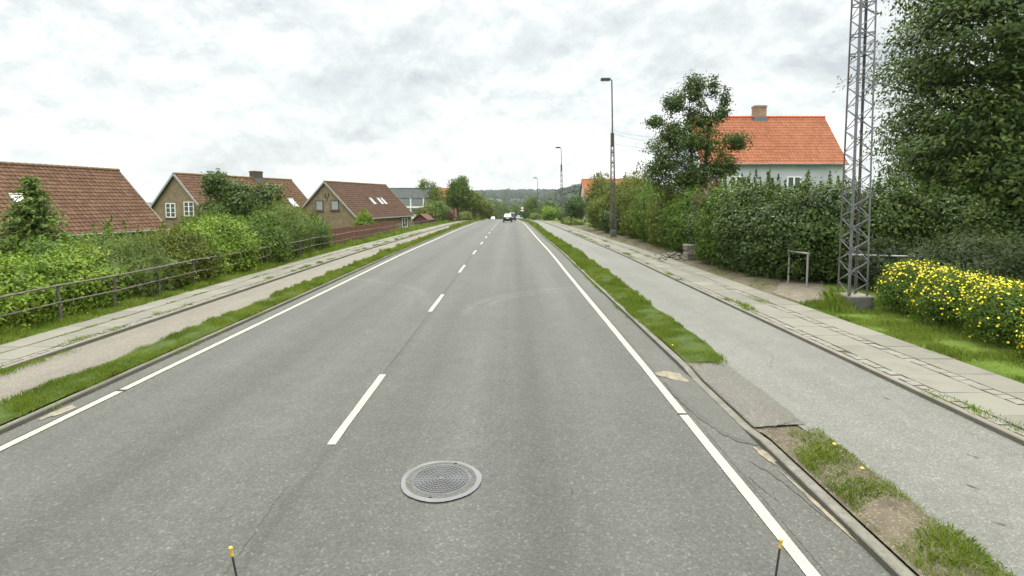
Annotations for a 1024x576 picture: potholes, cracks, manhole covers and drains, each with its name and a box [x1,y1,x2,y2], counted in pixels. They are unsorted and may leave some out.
manhole cover [401,461,482,502]
